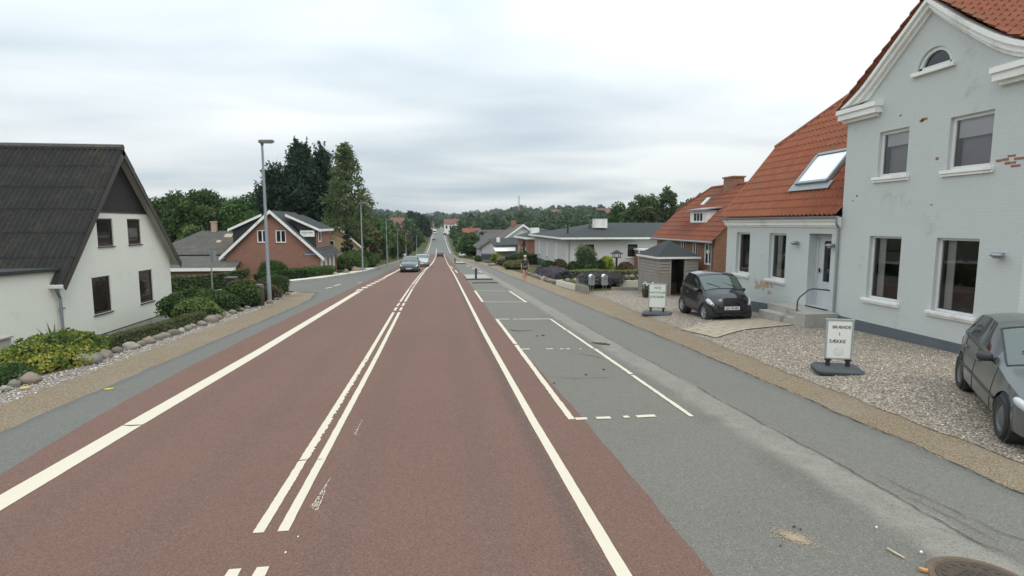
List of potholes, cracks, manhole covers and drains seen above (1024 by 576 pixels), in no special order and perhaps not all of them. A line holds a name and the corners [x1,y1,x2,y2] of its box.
crack [887,478,1024,557]
manhole cover [926,556,1019,576]
